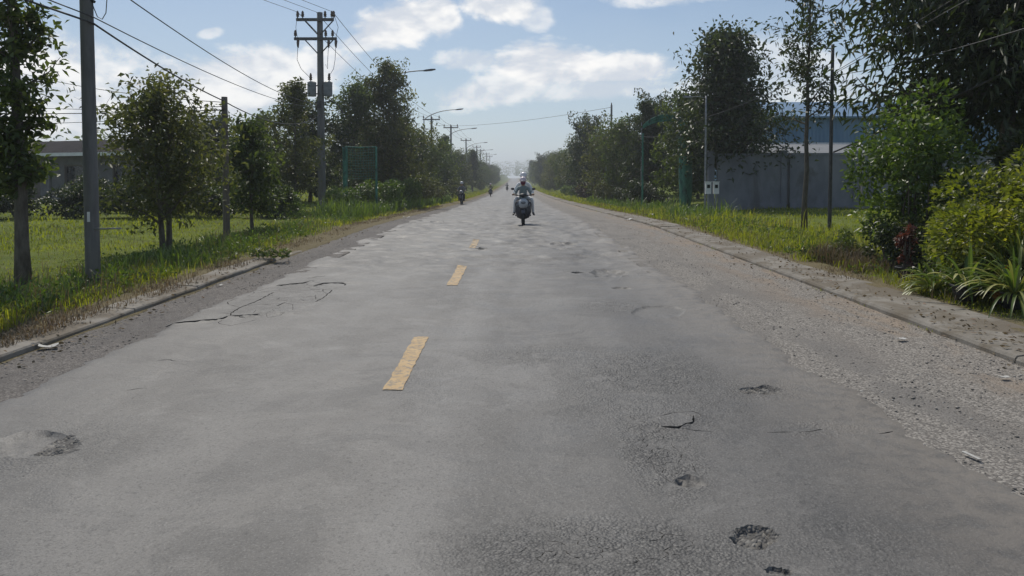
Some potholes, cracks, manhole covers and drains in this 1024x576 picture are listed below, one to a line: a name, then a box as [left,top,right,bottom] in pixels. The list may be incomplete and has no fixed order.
crack [635,411,711,491]
pothole [631,306,686,319]
pothole [736,385,783,395]
pothole [763,566,794,576]
crack [519,531,693,565]
pothole [674,474,709,489]
crack [166,276,346,327]
pothole [0,429,84,459]
pothole [589,269,630,278]
pothole [729,524,781,551]
